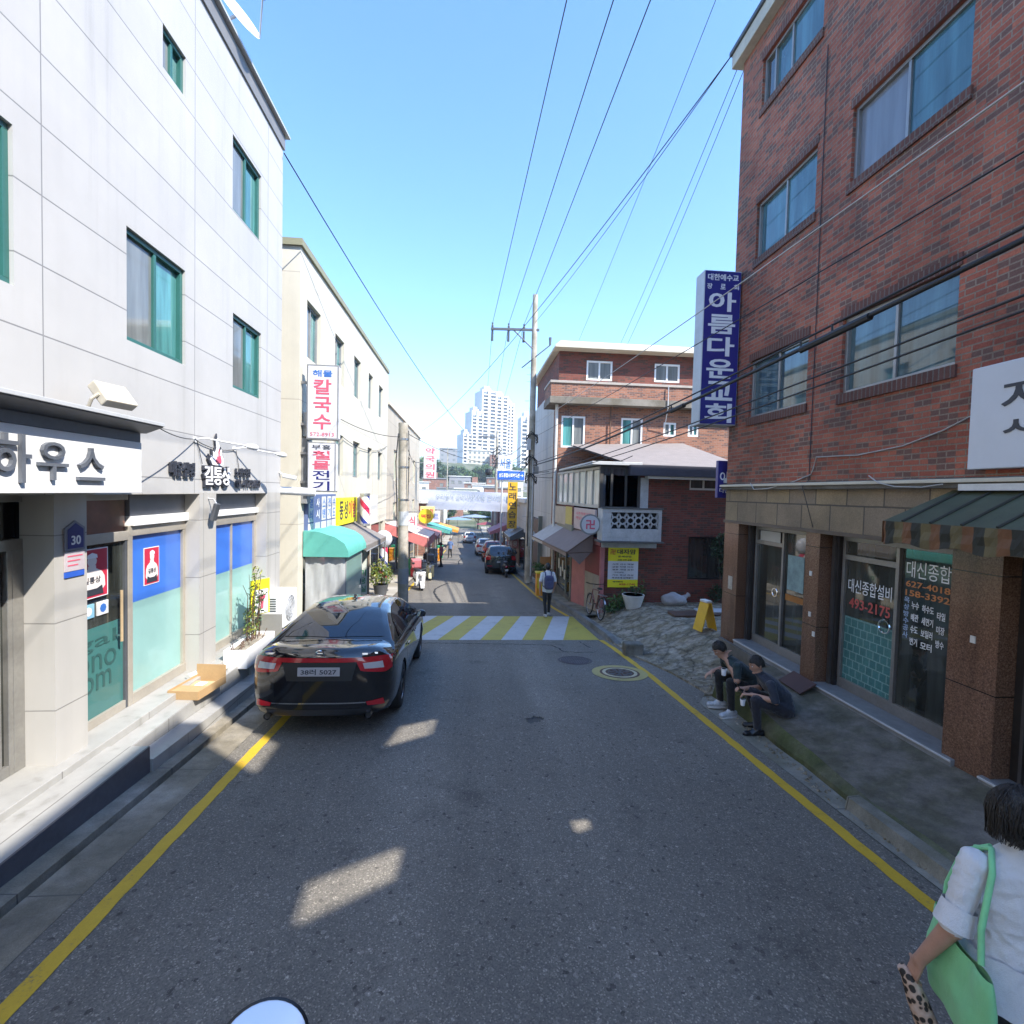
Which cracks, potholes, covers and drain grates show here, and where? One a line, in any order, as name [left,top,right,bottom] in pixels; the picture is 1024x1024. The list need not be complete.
manhole cover [558,656,592,665]
manhole cover [592,665,648,681]
